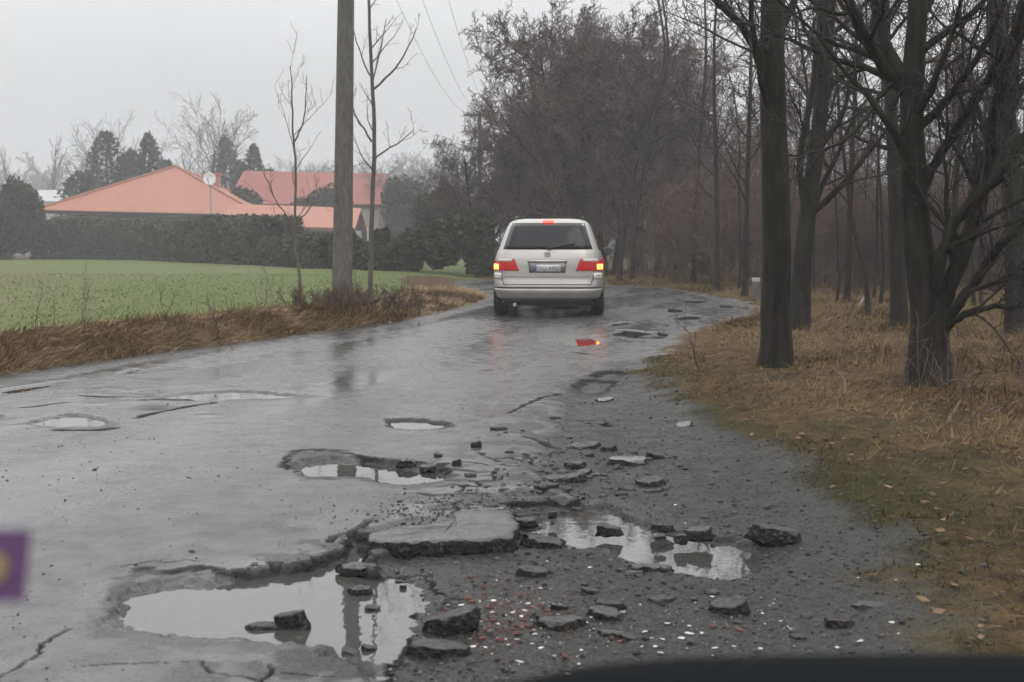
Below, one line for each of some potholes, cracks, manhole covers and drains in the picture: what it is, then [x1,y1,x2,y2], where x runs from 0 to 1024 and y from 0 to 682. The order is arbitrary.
pothole [380,416,460,434]
pothole [506,496,821,599]
pothole [273,448,464,492]
pothole [13,412,129,435]
crack [17,395,224,431]
crack [0,628,337,682]
pothole [600,328,668,344]
pothole [141,388,328,405]
pothole [60,527,473,682]
pothole [582,369,636,383]
crack [414,393,620,532]
